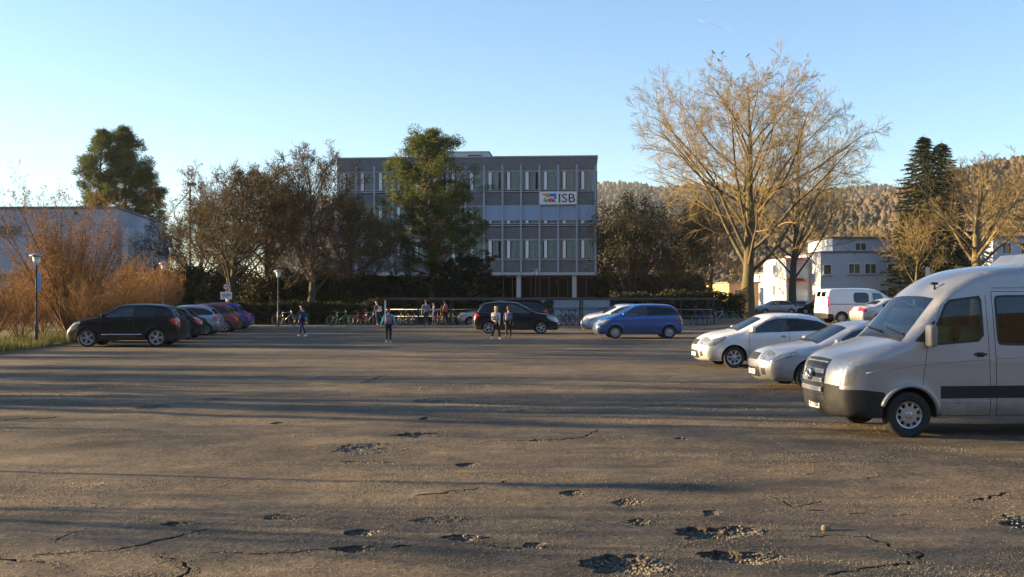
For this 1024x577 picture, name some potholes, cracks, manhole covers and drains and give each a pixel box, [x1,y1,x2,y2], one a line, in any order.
crack [0,529,322,577]
pothole [998,514,1024,530]
pothole [408,516,471,524]
pothole [610,498,647,508]
pothole [438,533,491,542]
pothole [327,545,388,553]
pothole [696,549,791,565]
crack [804,534,926,577]
pothole [331,443,411,455]
crack [972,492,1010,501]
pothole [623,518,656,526]
crack [415,487,479,496]
